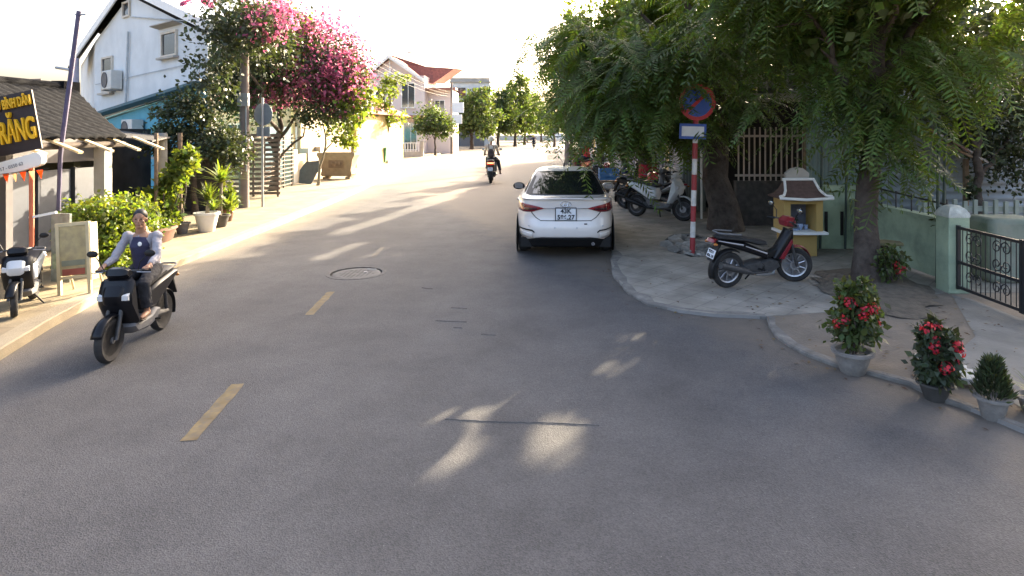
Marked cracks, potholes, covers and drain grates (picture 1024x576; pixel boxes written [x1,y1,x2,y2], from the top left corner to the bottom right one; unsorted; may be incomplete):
crack [435,307,496,336]
manhole cover [326,266,387,280]
